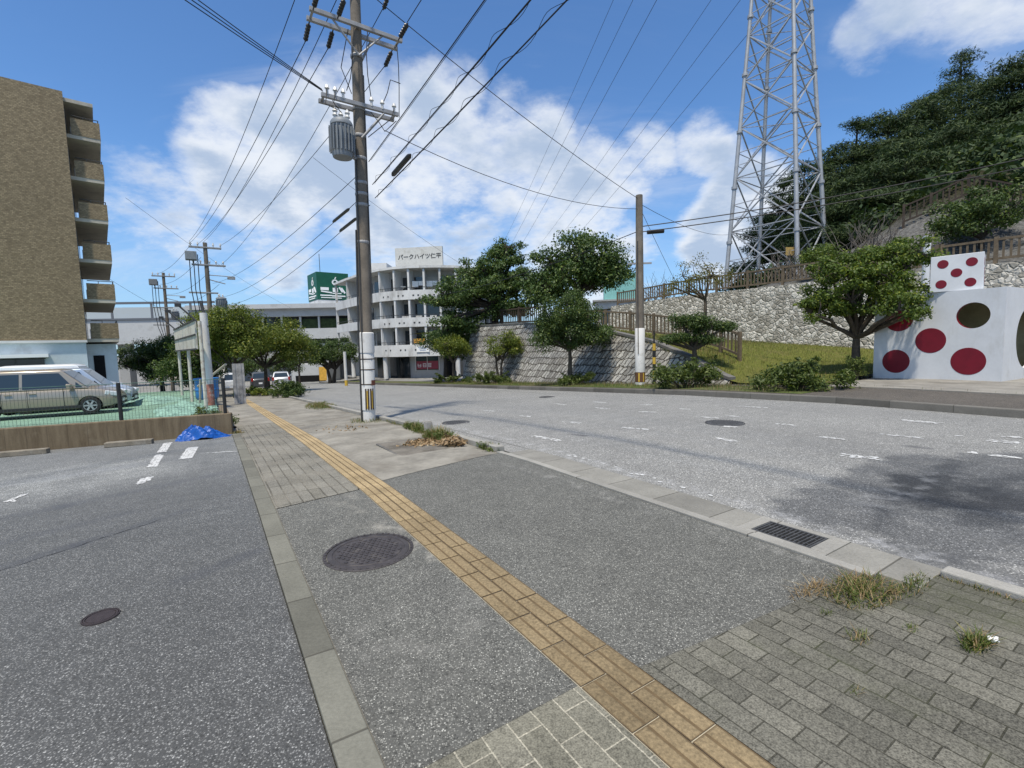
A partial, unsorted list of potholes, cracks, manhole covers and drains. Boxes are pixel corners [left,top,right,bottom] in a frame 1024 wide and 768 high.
manhole cover [80,608,121,626]
drain grate [752,521,828,548]
manhole cover [322,533,414,572]
